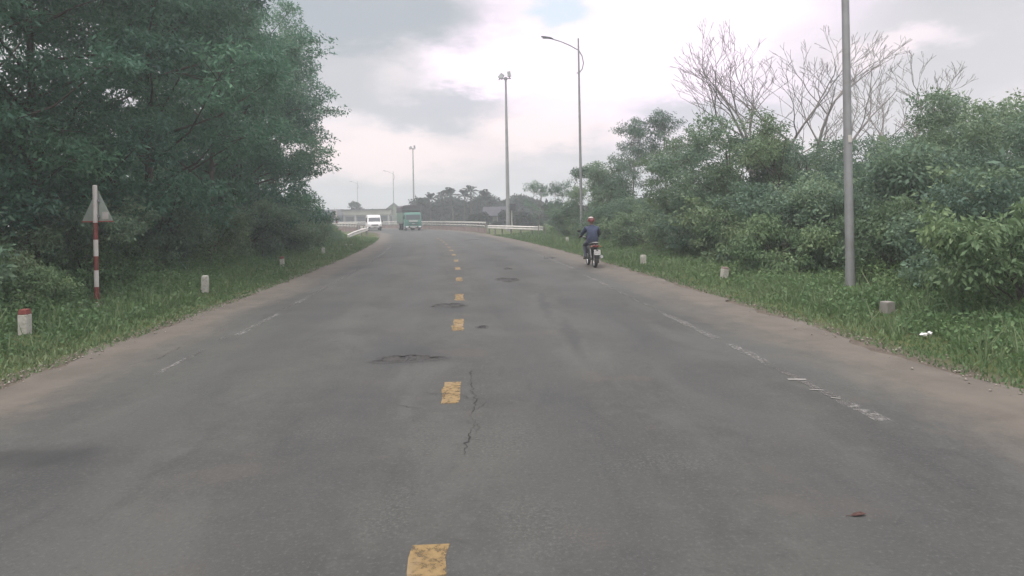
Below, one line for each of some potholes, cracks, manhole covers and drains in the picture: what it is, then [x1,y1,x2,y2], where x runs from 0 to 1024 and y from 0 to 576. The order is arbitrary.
crack [435,371,486,454]
pothole [368,354,452,364]
